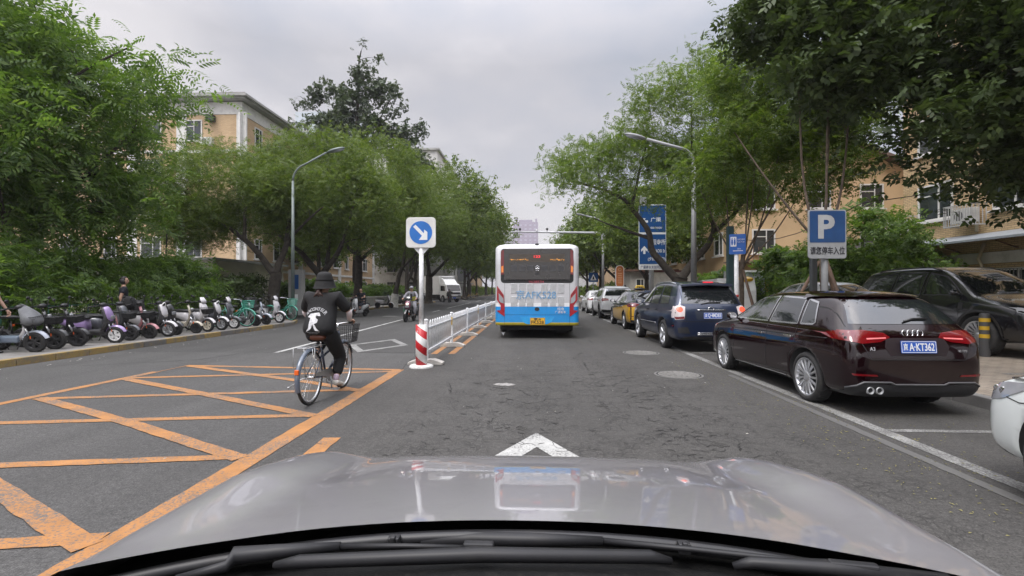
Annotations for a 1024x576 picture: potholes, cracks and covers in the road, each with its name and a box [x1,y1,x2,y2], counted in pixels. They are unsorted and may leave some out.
manhole cover [654,371,704,379]
